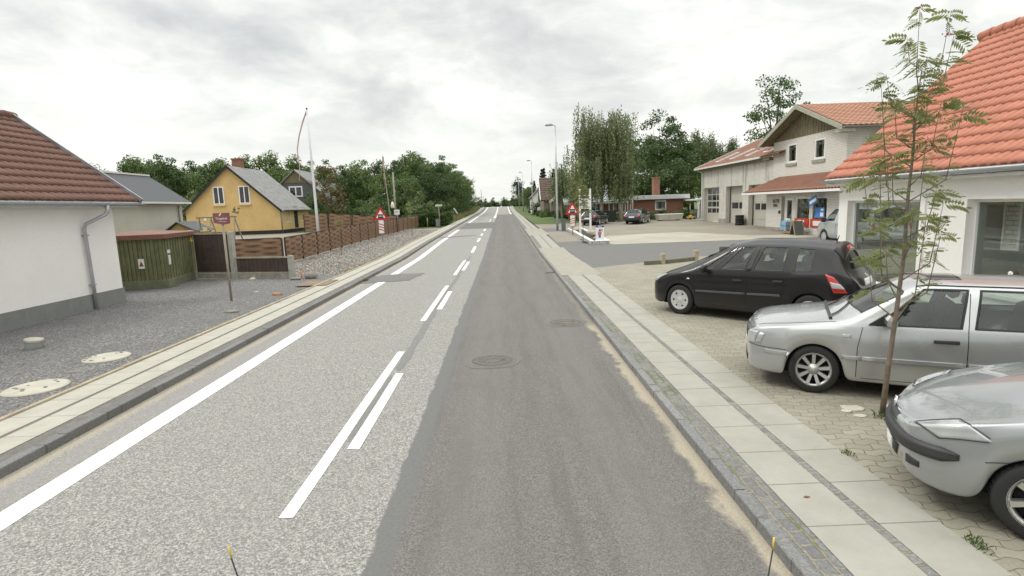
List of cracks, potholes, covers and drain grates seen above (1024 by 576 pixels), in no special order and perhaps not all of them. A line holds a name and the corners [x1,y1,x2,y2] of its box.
manhole cover [462,353,523,369]
manhole cover [544,318,587,327]
